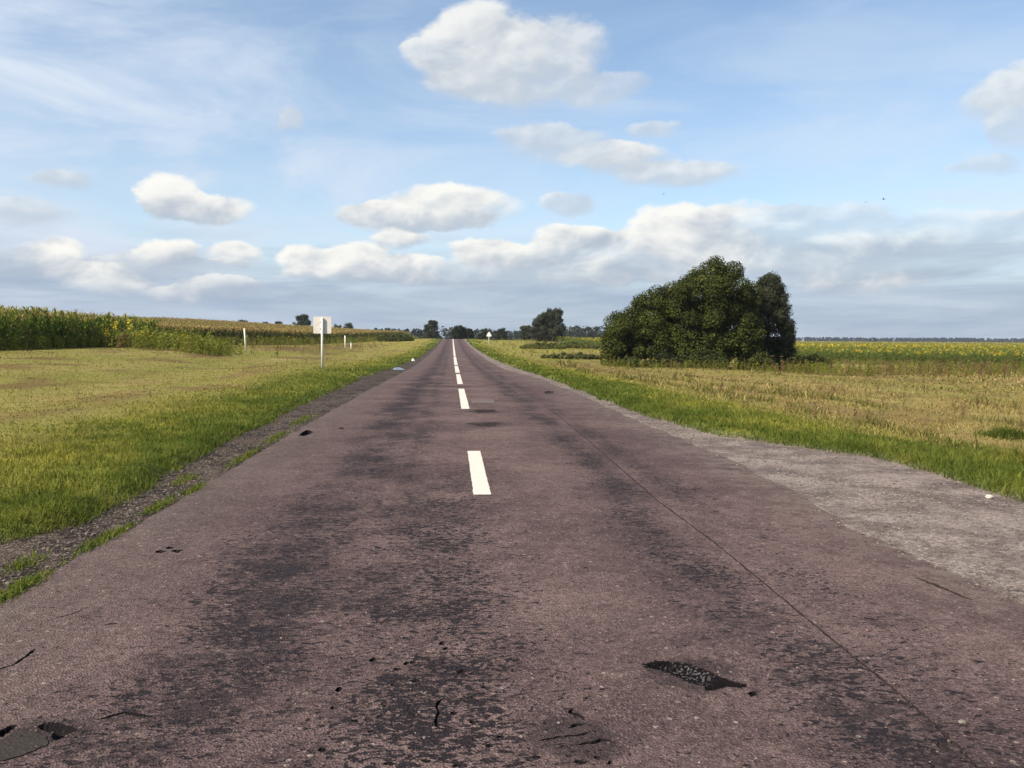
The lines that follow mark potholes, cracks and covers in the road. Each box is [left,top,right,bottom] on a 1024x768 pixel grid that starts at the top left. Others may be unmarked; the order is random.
crack [0,649,35,669]
pothole [38,722,78,740]
crack [539,708,618,749]
crack [96,712,154,720]
crack [551,410,980,768]
pothole [642,660,756,697]
crack [434,698,447,732]
